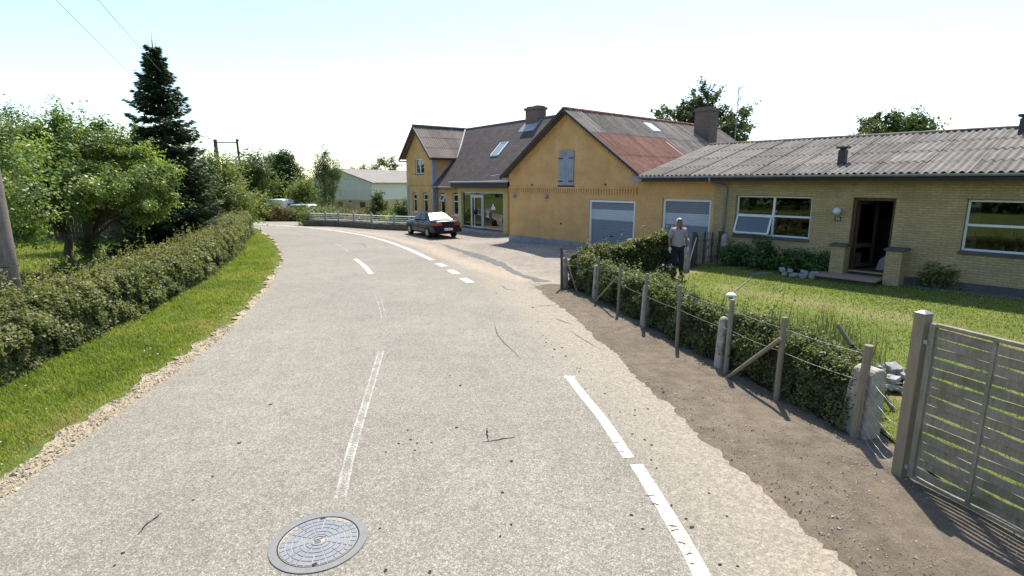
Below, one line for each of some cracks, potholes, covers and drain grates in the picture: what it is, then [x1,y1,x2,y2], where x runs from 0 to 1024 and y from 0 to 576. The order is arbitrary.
manhole cover [268,512,367,574]
